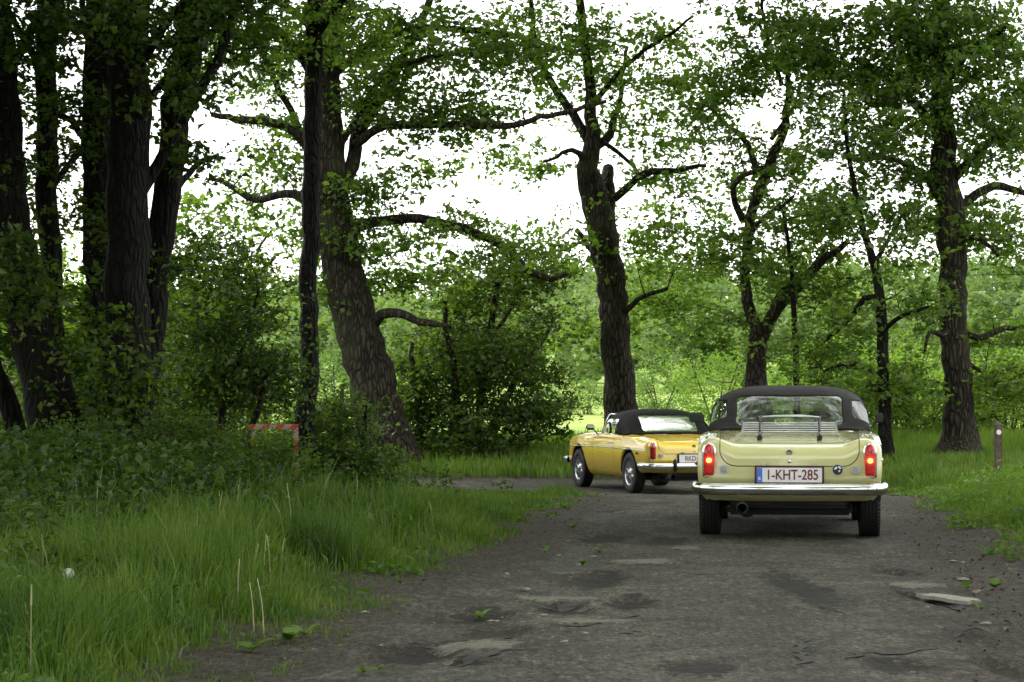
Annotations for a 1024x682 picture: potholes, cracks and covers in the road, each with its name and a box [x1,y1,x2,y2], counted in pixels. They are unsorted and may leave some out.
pothole [601,592,666,612]
pothole [560,567,633,592]
pothole [884,591,970,611]
pothole [523,600,598,616]
pothole [365,639,472,669]
crack [845,648,935,658]
pothole [425,655,498,667]
